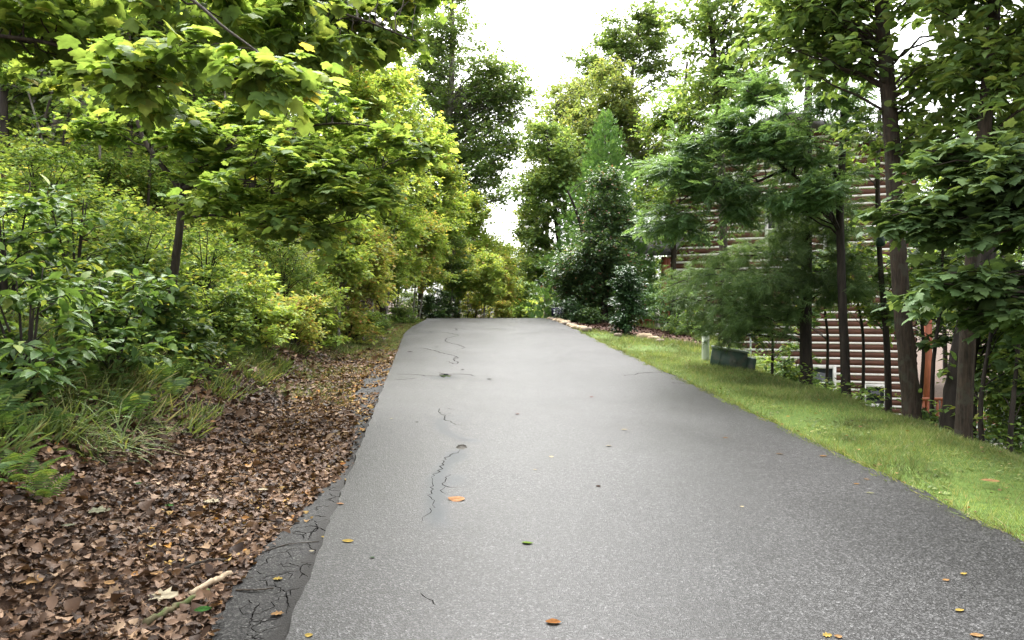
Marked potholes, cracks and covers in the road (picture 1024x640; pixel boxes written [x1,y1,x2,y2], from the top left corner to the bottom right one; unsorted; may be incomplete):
crack [401,328,473,380]
crack [239,480,346,640]
crack [422,453,454,520]
